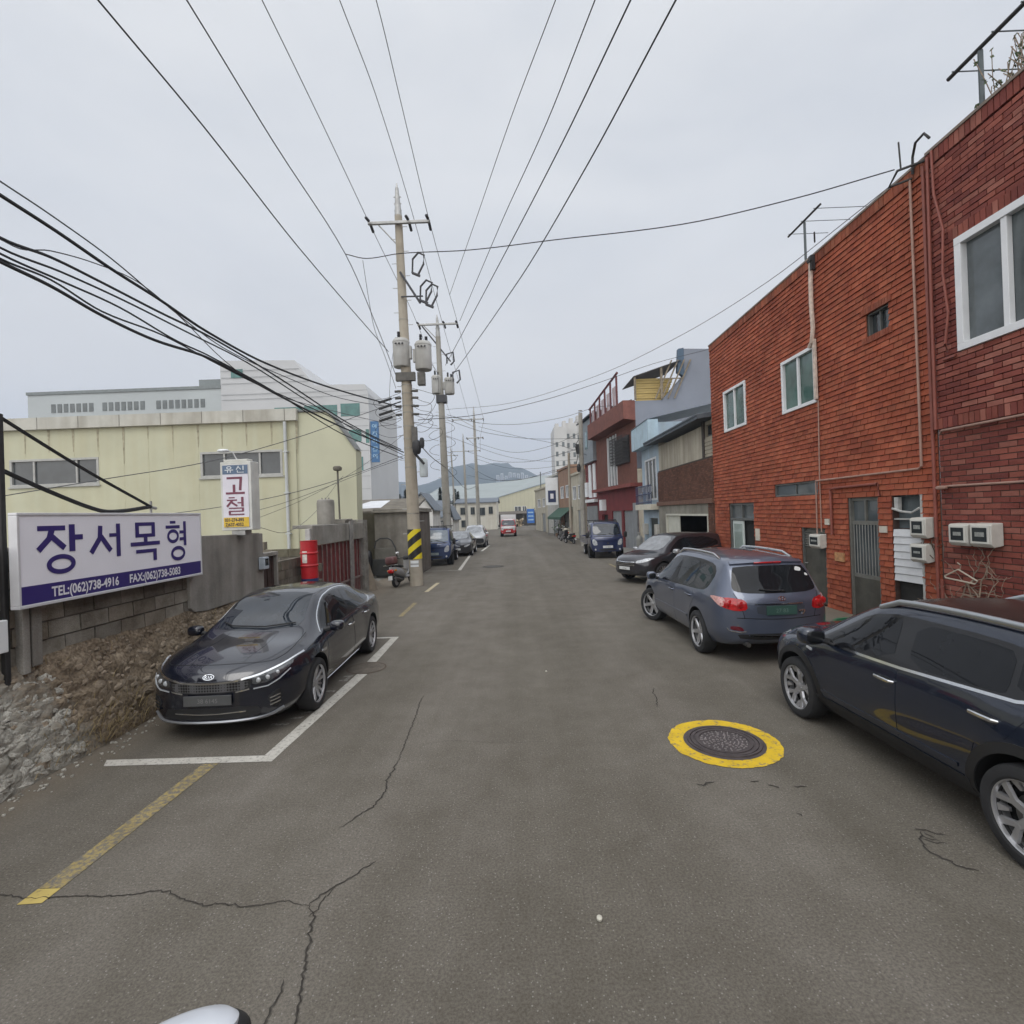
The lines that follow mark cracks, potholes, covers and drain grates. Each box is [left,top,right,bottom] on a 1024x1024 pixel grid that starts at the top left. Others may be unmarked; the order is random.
crack [341,695,541,827]
crack [0,861,376,1024]
crack [914,828,979,871]
manhole cover [668,720,784,768]
manhole cover [346,662,386,674]
